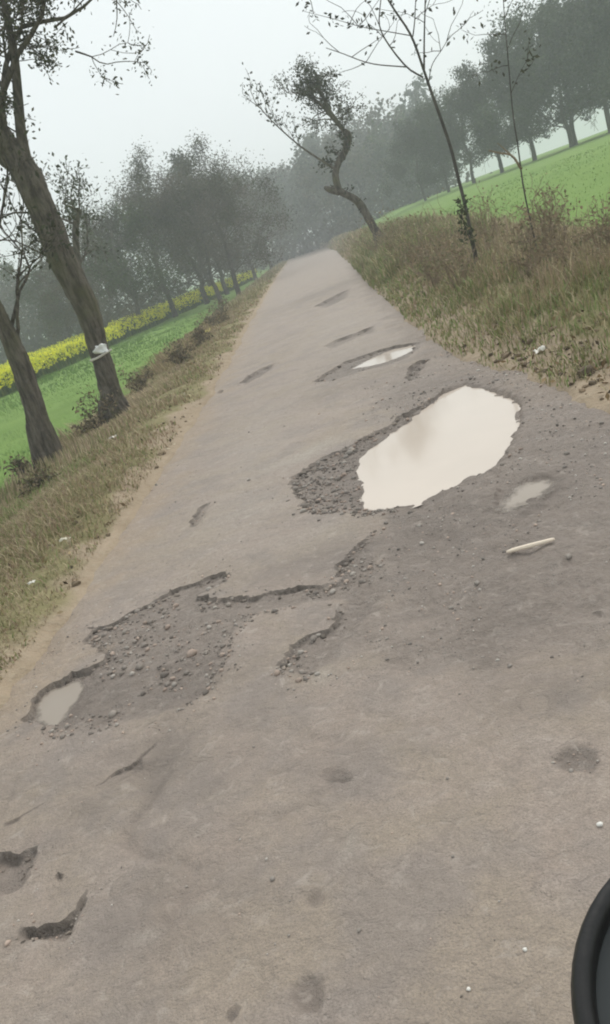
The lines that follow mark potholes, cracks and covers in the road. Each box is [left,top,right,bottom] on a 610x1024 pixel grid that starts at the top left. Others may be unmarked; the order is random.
pothole [312,287,355,310]
pothole [312,342,424,383]
pothole [323,325,378,350]
pothole [287,375,535,520]
pothole [188,501,215,530]
pothole [238,363,277,386]
pothole [404,359,429,382]
pothole [544,741,607,777]
pothole [14,889,89,945]
pothole [20,532,392,741]
crack [94,742,158,787]
